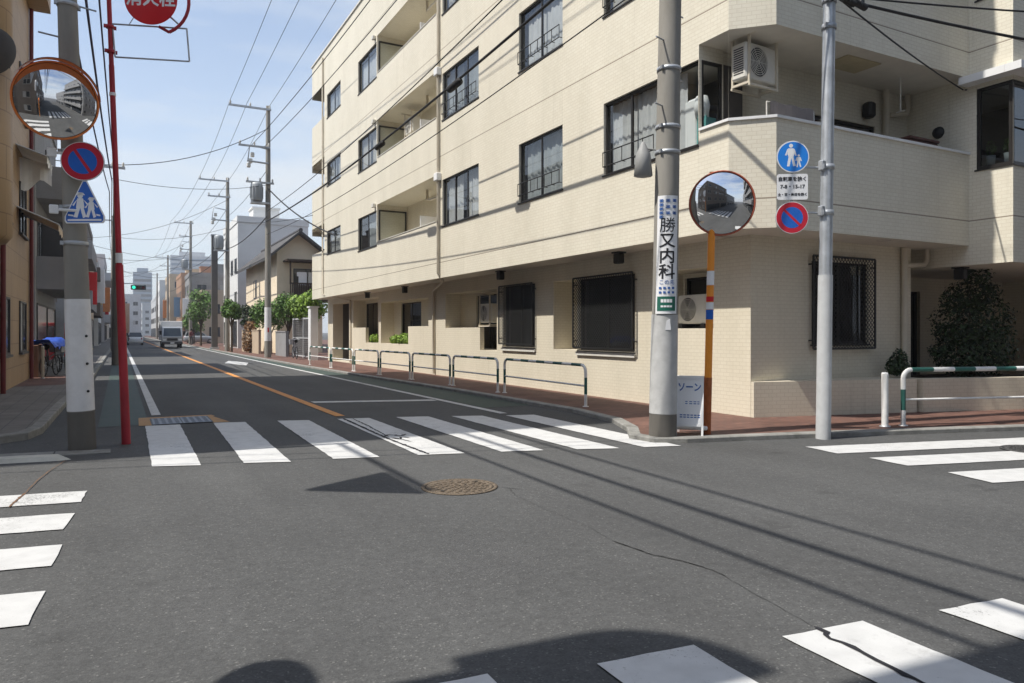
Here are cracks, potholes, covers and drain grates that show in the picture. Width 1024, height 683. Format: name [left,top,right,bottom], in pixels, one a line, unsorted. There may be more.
crack [9,460,65,507]
manhole cover [421,478,498,495]
crack [504,487,811,625]
crack [814,626,925,683]
